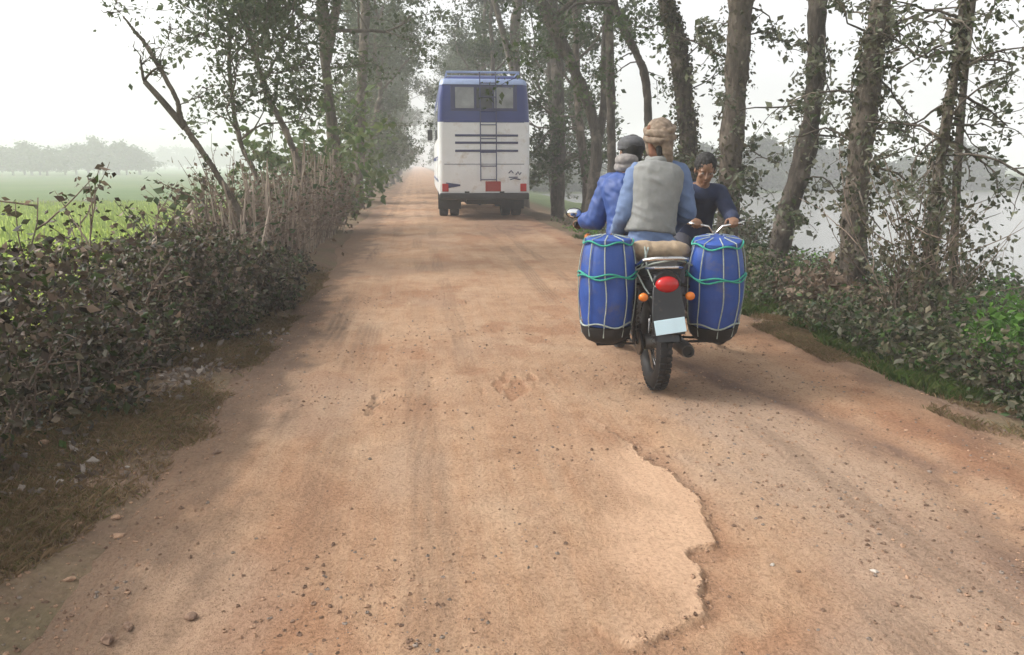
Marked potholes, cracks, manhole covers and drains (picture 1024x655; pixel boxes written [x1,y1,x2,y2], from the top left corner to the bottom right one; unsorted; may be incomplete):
pothole [534,419,811,655]
